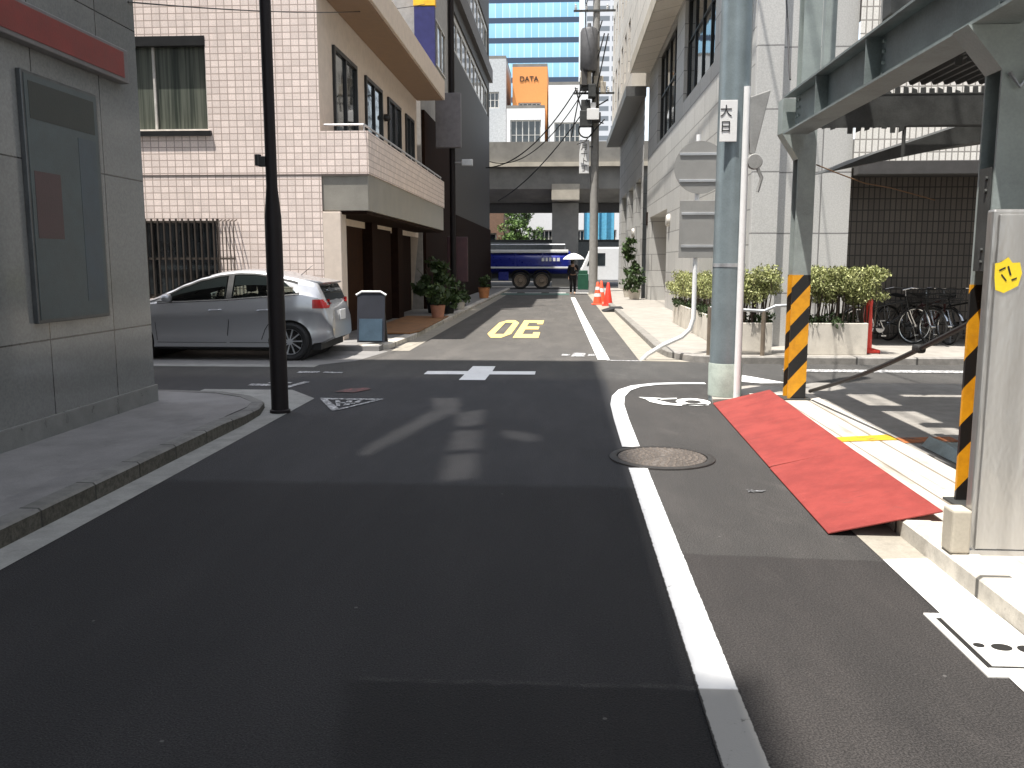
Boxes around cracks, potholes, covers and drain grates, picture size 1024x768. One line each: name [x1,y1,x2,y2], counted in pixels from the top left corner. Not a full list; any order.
manhole cover [609,446,716,470]
